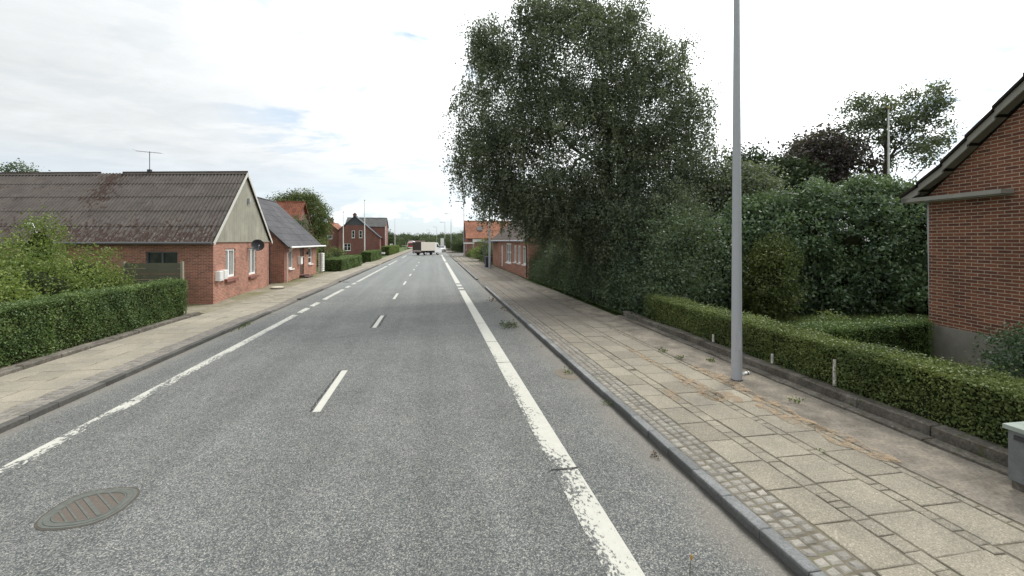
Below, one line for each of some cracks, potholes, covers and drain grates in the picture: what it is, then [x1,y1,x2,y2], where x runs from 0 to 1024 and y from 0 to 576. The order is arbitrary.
manhole cover [34,487,140,531]
